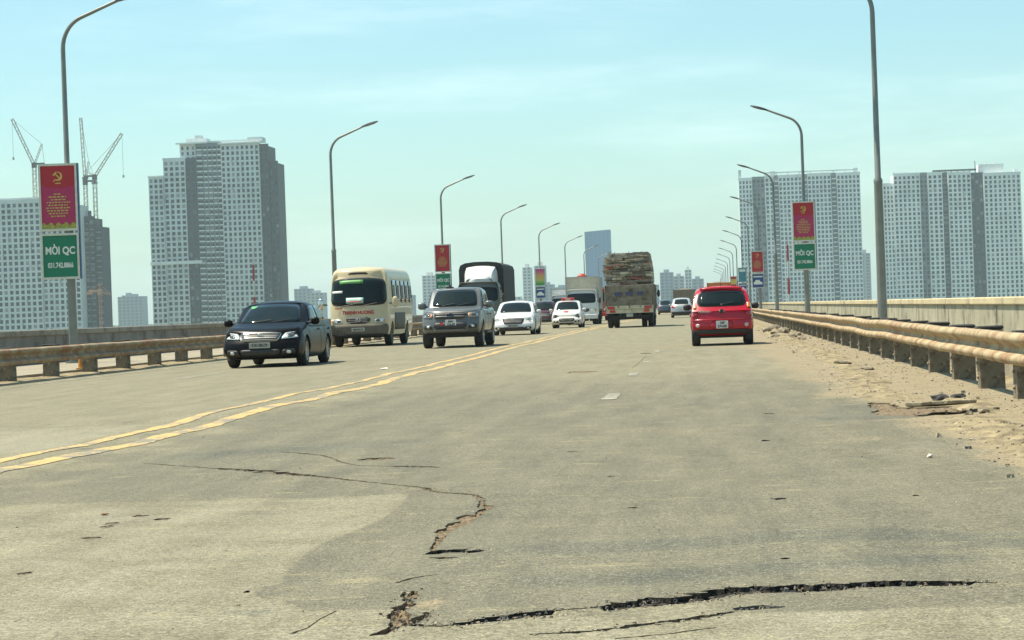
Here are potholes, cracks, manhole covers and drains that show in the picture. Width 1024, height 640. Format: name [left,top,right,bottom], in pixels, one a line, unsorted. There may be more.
crack [146,452,487,508]
crack [529,611,734,639]
